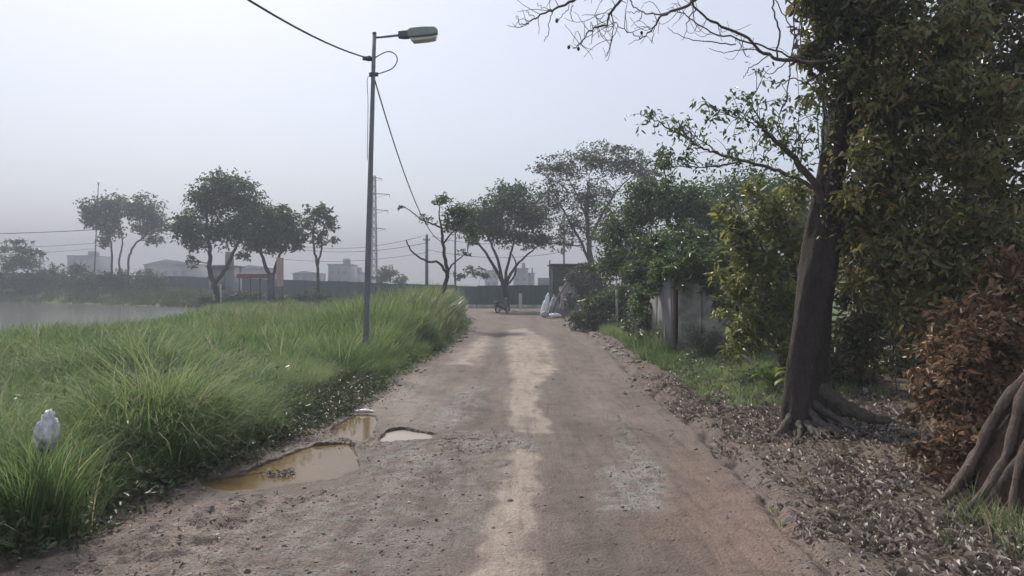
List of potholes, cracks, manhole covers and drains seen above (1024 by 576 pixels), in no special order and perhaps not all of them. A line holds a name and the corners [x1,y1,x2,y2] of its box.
pothole [372,426,446,443]
pothole [191,439,368,493]
pothole [324,413,385,442]
